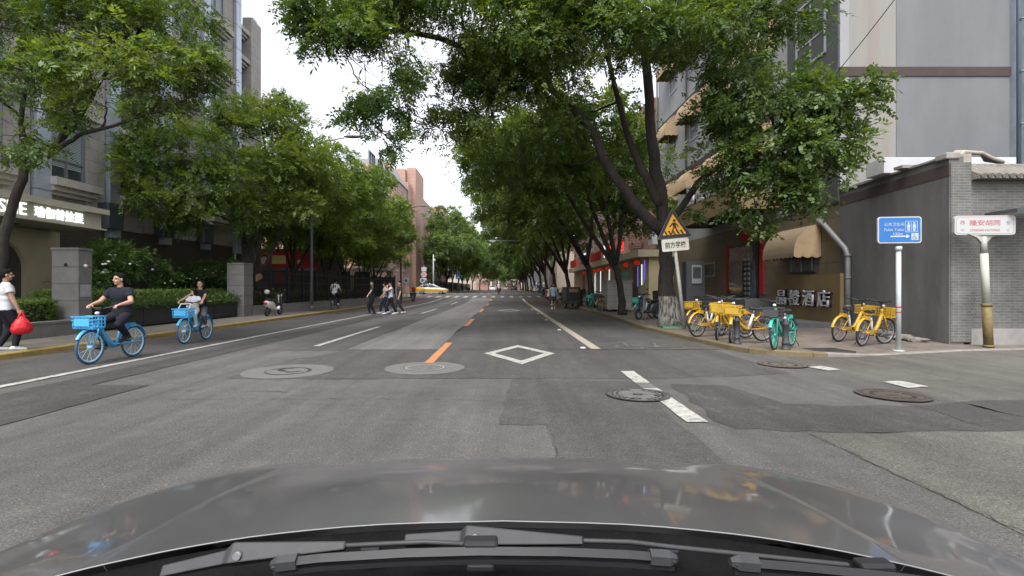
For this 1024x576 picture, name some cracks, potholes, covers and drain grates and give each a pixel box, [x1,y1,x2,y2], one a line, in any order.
manhole cover [384,362,464,375]
manhole cover [240,364,334,379]
manhole cover [606,388,671,401]
manhole cover [854,388,934,401]
